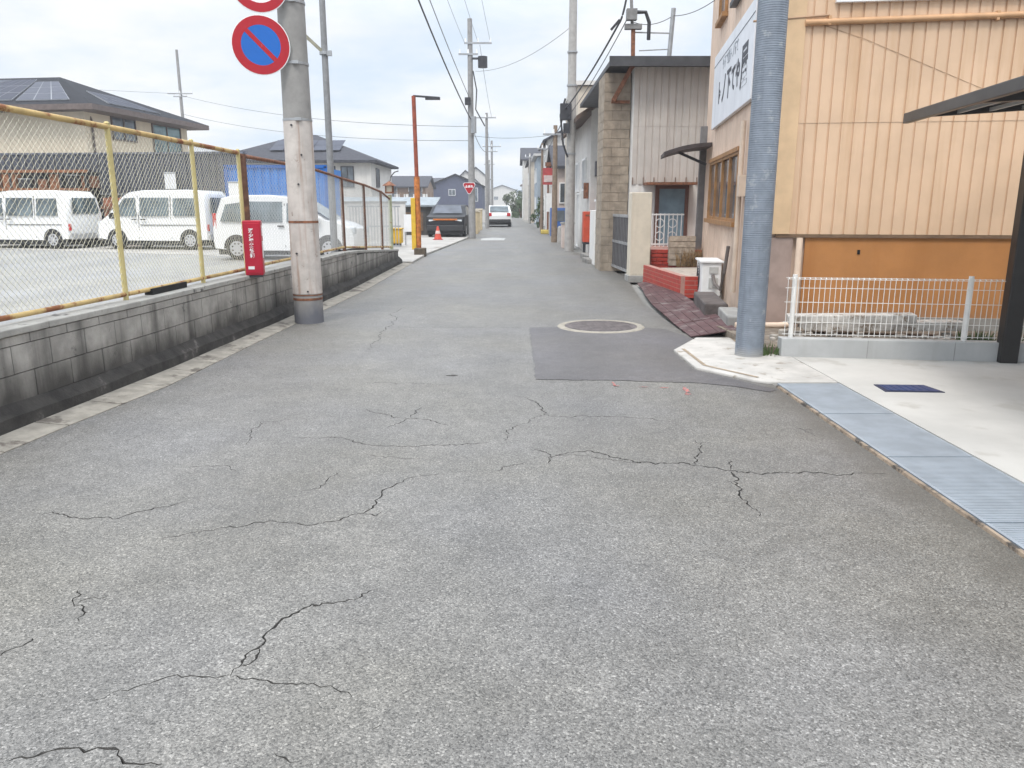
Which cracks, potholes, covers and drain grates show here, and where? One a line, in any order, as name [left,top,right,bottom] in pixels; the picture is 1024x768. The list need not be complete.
crack [305,437,486,459]
crack [364,408,447,428]
crack [38,502,183,519]
crack [71,589,109,621]
crack [87,589,376,703]
crack [506,396,672,443]
crack [499,440,885,517]
crack [159,473,440,541]
